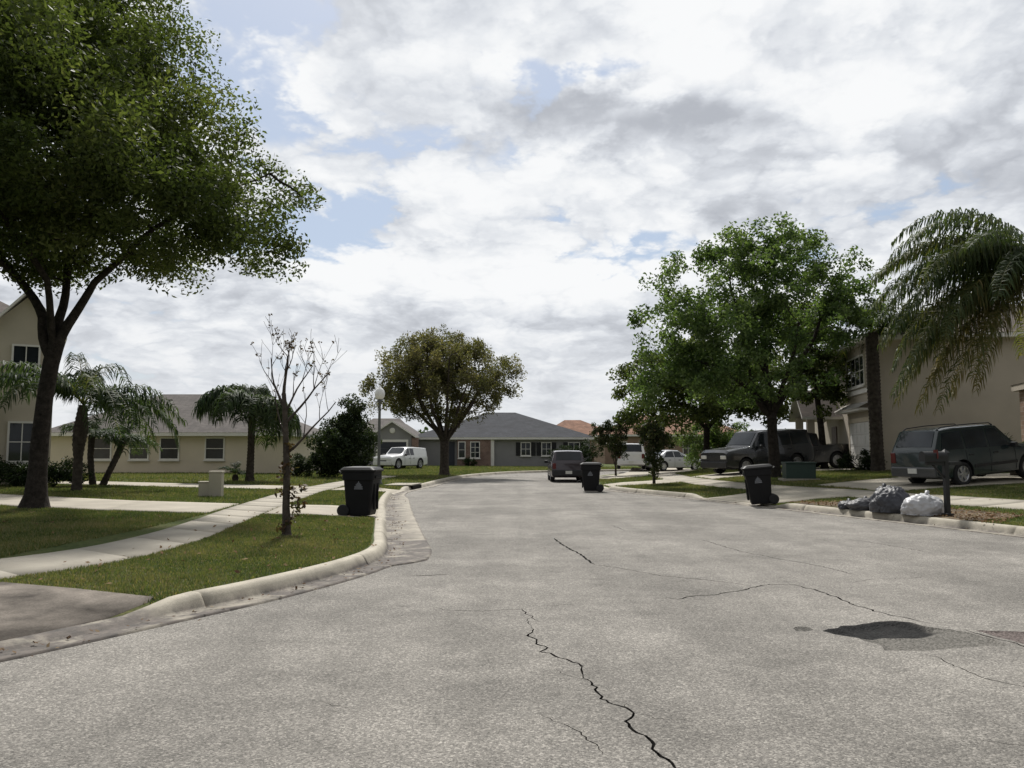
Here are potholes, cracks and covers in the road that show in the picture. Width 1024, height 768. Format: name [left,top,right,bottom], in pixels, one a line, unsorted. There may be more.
pothole [824,621,1008,651]
crack [433,533,927,768]
crack [930,655,1024,687]
